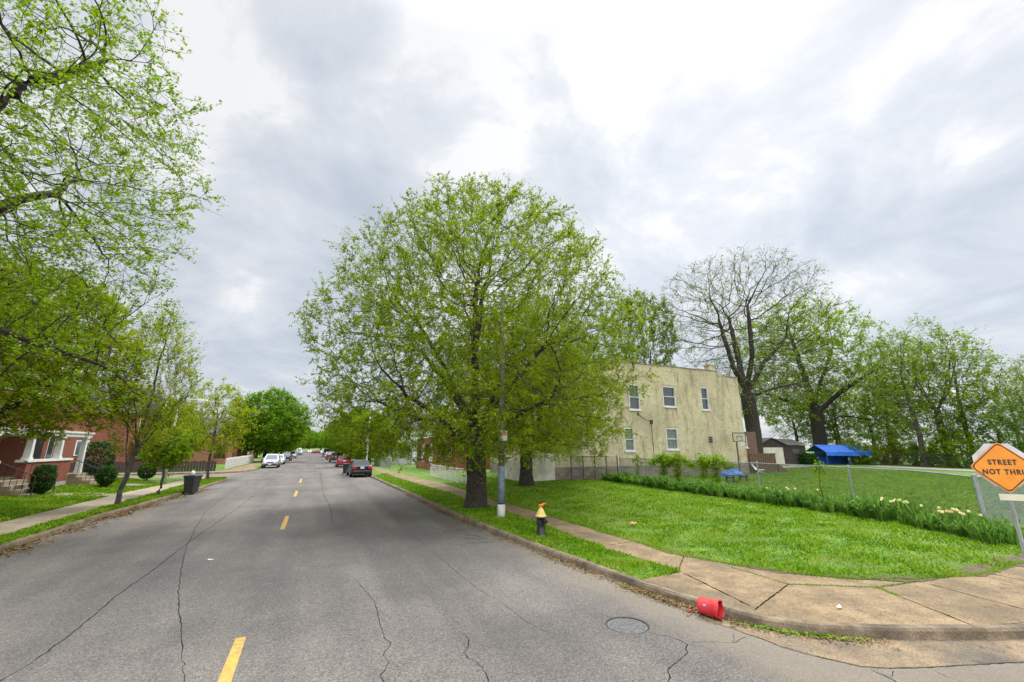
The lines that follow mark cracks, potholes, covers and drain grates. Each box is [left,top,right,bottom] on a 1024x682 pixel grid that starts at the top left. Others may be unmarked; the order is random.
crack [355,578,391,682]
crack [653,633,750,682]
manhole cover [605,617,650,634]
crack [0,480,268,682]
crack [463,634,489,682]
